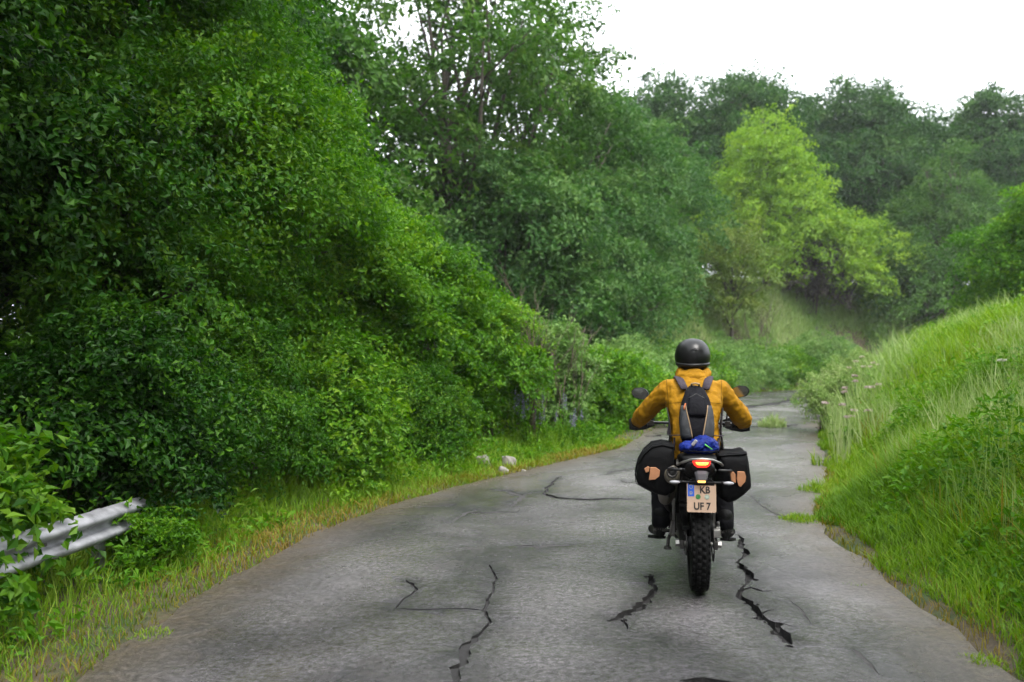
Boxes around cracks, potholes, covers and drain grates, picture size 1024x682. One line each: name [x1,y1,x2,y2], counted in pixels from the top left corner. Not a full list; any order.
crack [395,565,498,682]
crack [607,574,658,629]
crack [415,489,532,522]
crack [735,496,812,648]
